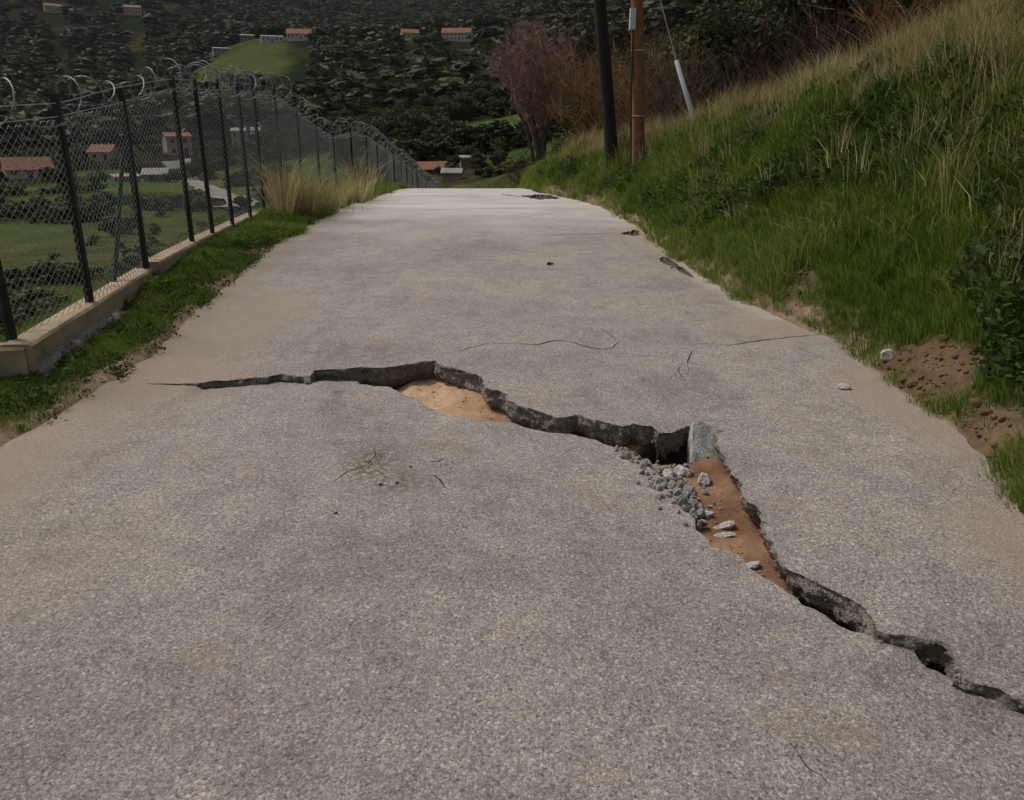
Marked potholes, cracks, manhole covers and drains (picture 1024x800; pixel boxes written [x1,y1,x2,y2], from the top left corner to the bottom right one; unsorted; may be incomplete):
crack [780,734,829,786]
crack [160,328,1024,714]
pothole [659,257,694,278]
